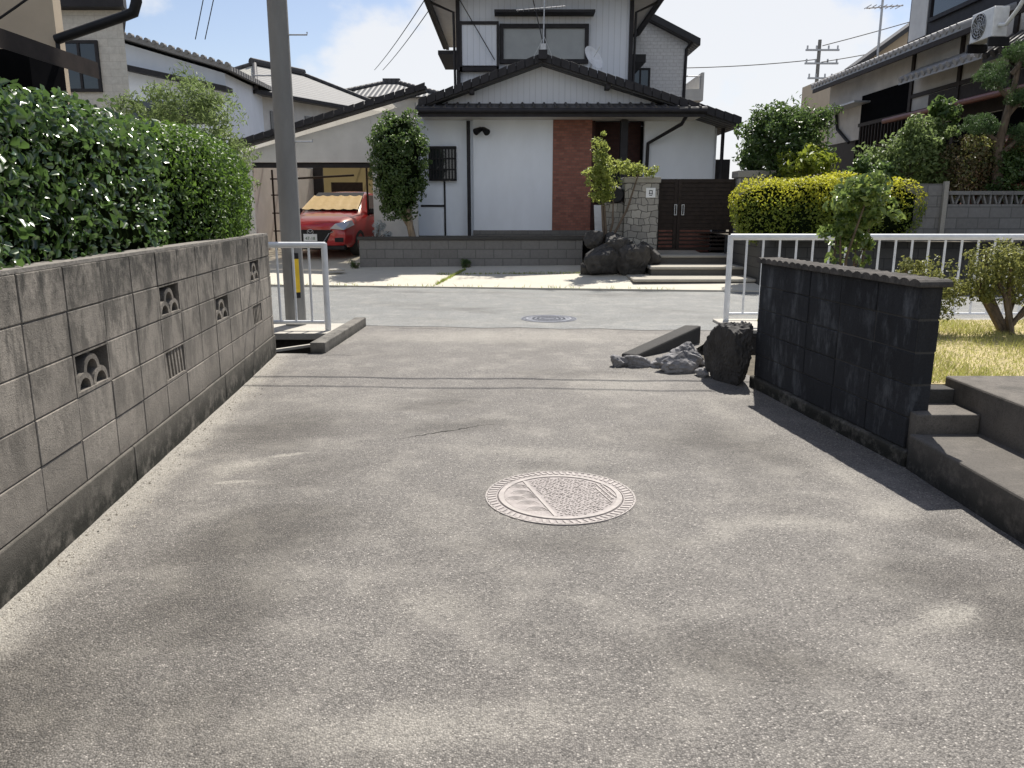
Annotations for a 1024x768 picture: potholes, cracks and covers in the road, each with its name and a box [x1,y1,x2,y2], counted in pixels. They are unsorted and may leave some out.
manhole cover [485,471,636,526]
manhole cover [521,315,577,323]
